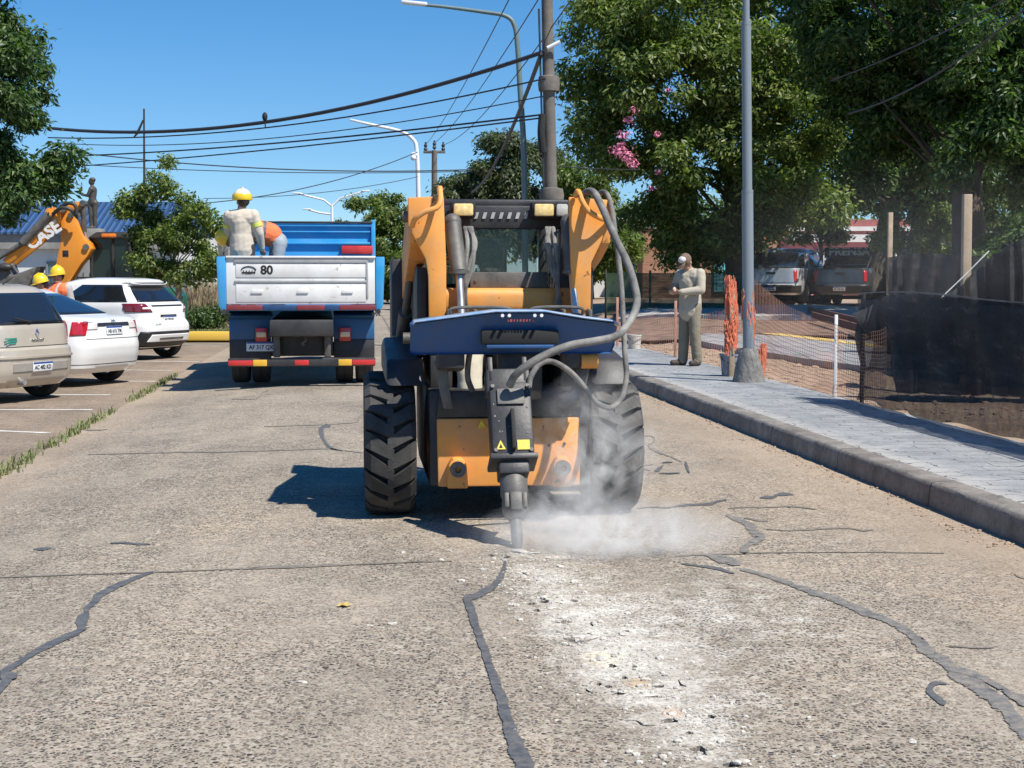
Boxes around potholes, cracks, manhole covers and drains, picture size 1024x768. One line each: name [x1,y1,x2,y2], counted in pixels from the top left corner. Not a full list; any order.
crack [644,435,682,470]
crack [637,499,816,509]
